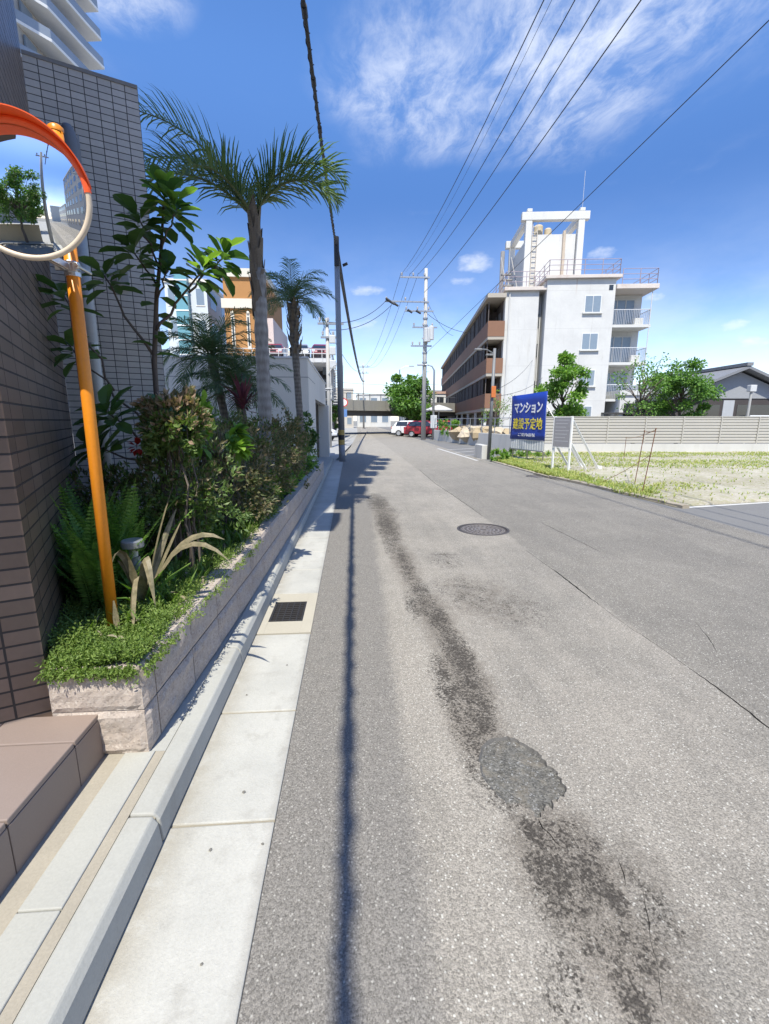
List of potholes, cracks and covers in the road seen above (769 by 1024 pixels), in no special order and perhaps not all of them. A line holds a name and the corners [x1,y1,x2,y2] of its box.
manhole cover [457,523,510,536]
crack [618,860,664,1010]
